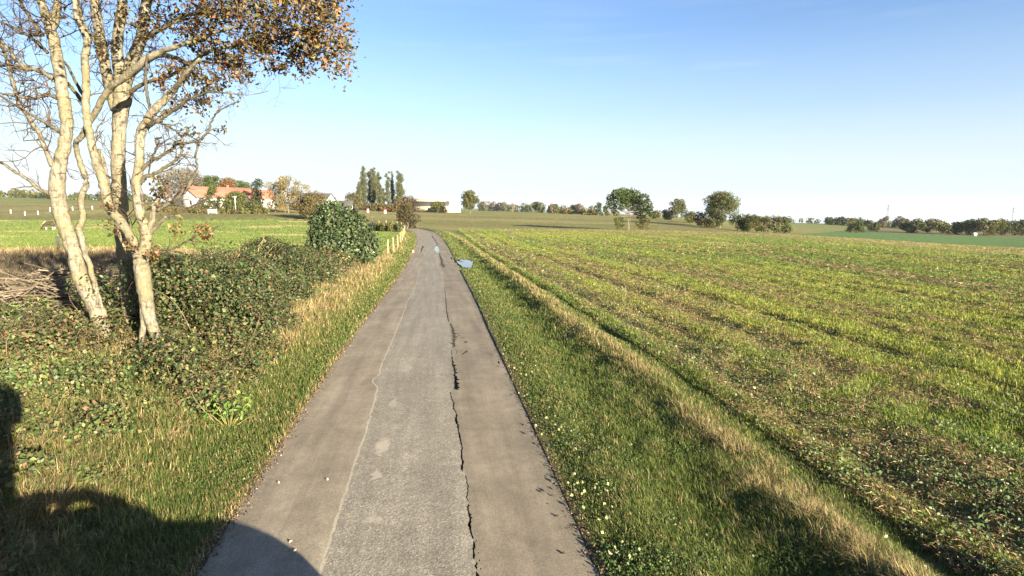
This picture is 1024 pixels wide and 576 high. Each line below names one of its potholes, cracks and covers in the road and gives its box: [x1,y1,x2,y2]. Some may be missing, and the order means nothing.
crack [450,392,481,576]
